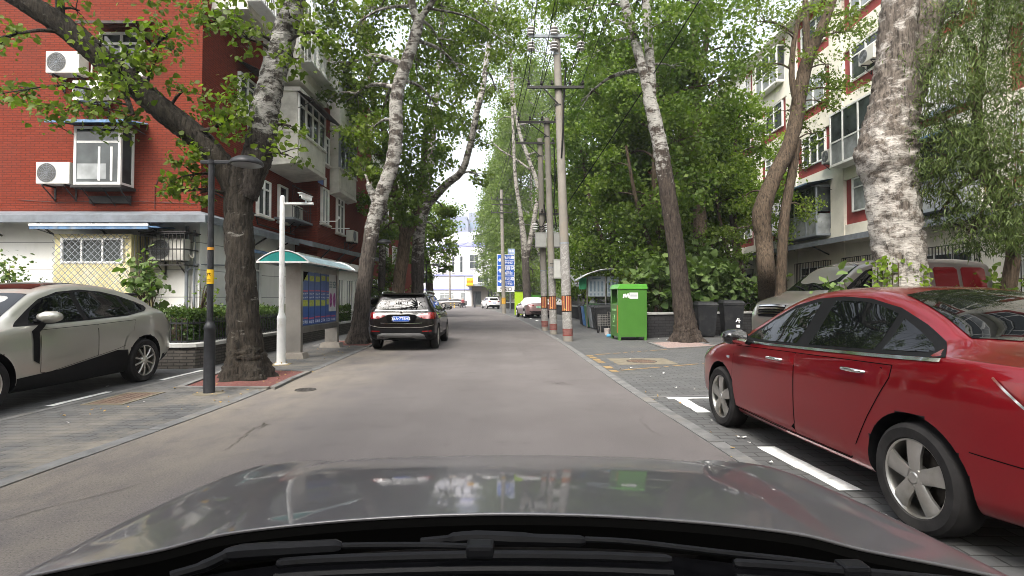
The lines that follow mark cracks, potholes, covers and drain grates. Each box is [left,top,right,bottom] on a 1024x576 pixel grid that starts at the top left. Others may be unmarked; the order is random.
crack [225,423,270,450]
